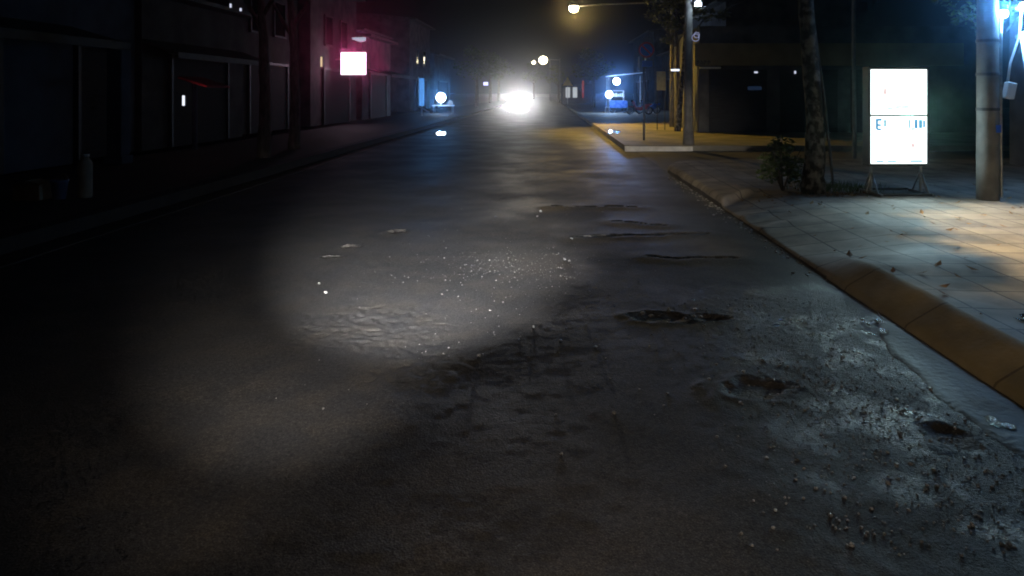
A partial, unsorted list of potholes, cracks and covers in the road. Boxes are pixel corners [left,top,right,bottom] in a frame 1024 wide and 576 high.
pothole [913,421,987,454]
pothole [696,375,801,401]
pothole [624,311,689,323]
pothole [686,313,734,321]
